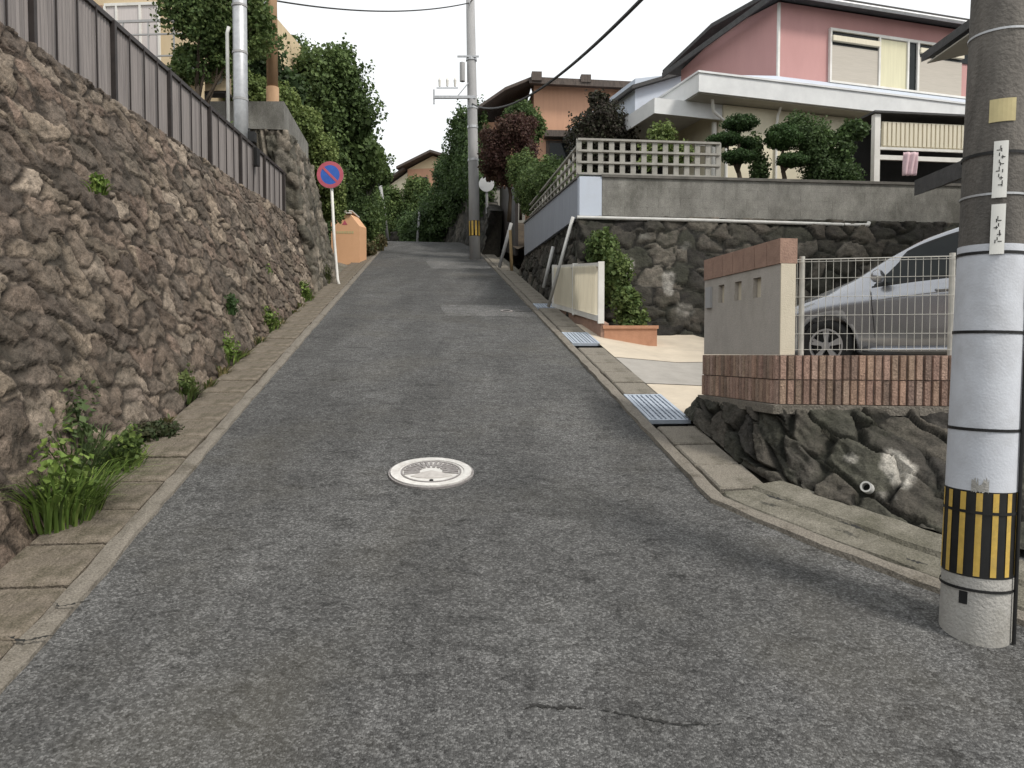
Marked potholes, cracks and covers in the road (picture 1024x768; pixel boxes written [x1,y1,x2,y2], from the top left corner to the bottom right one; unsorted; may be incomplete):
crack [525,703,722,726]
manhole cover [388,457,474,490]
drain grate [623,394,691,426]
drain grate [562,332,600,348]
